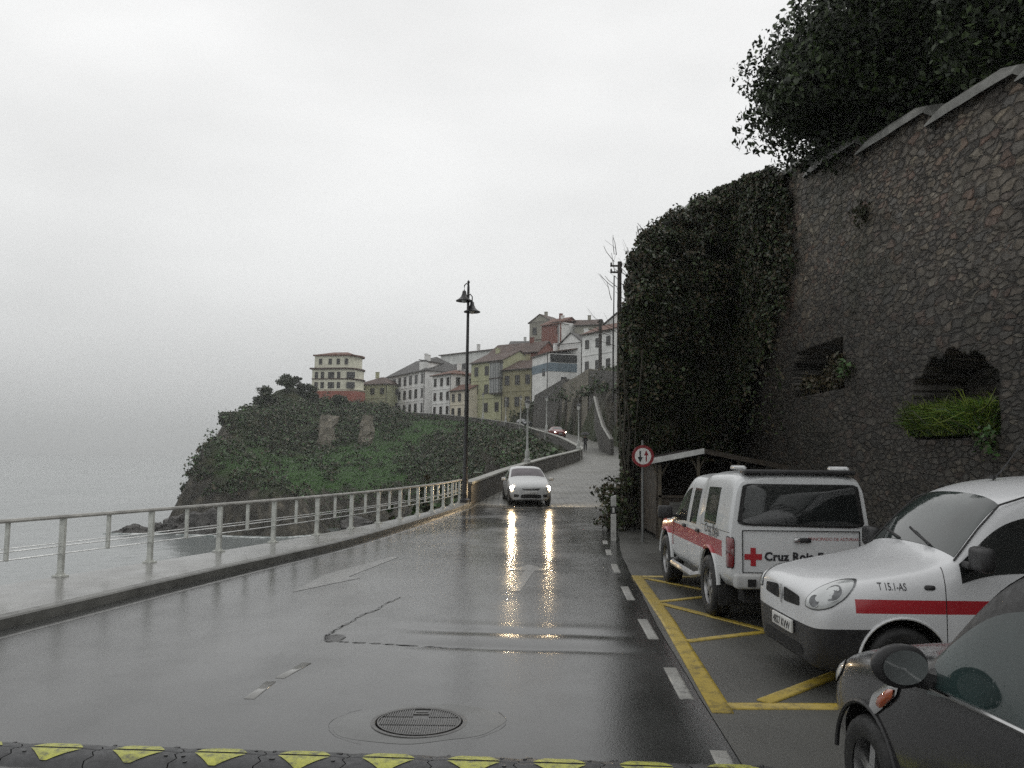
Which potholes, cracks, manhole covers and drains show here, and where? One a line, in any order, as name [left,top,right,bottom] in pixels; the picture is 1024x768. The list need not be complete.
crack [324,598,459,649]
manhole cover [370,707,467,738]
